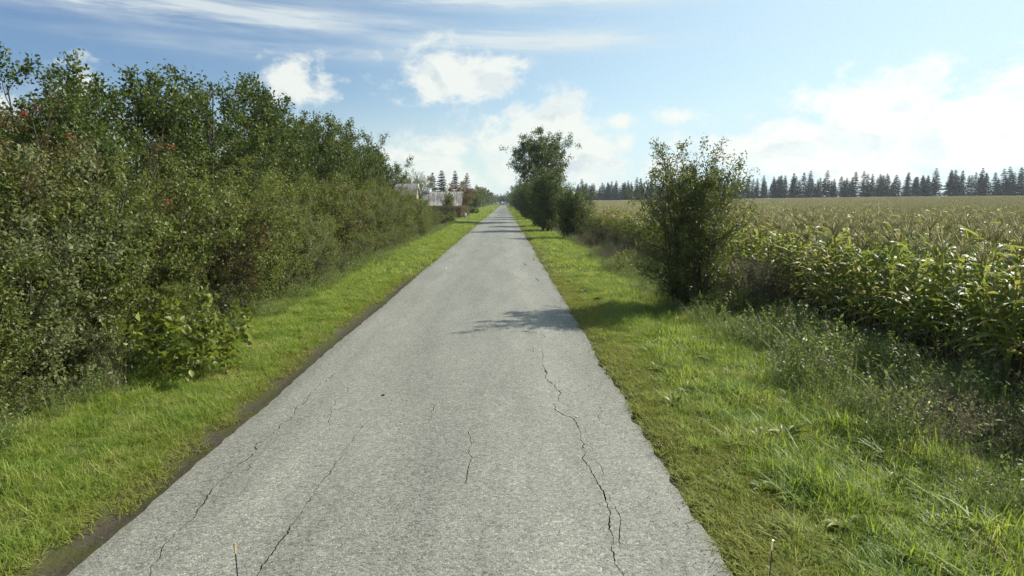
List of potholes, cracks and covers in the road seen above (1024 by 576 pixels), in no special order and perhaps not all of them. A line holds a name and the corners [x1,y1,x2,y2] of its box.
crack [533,340,624,575]
crack [257,424,365,575]
crack [150,373,348,576]
